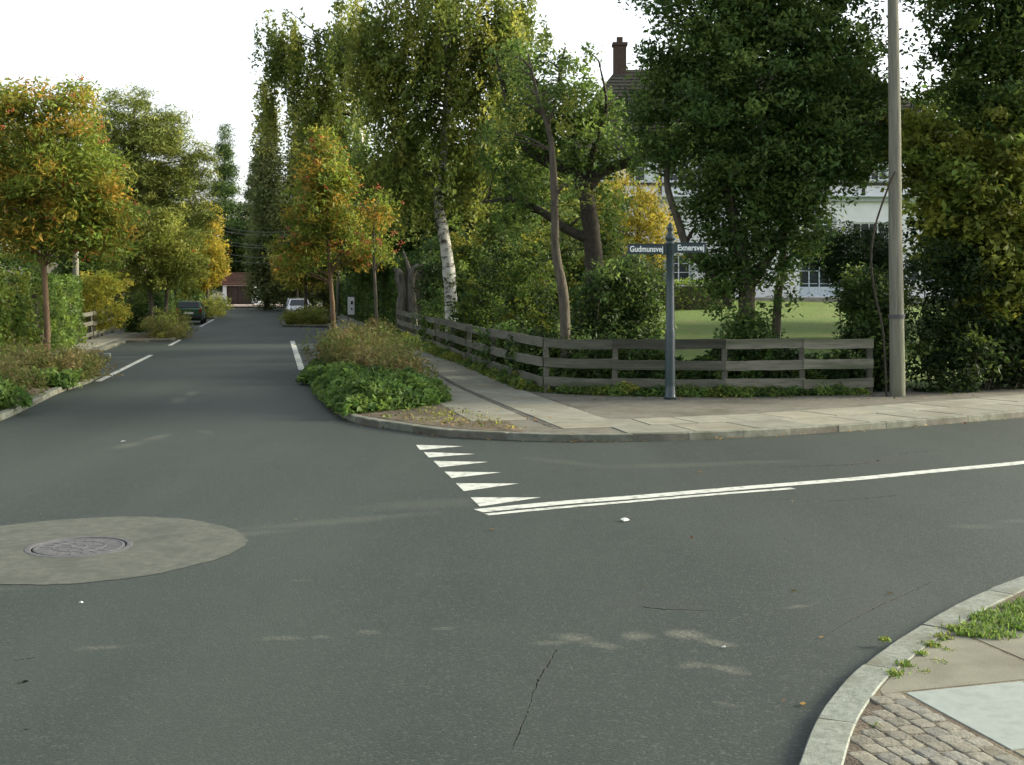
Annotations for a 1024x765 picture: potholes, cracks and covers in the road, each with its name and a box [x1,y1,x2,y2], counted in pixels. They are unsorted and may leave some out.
crack [824,583,929,637]
manhole cover [24,536,133,558]
crack [798,450,935,467]
crack [512,650,557,749]
